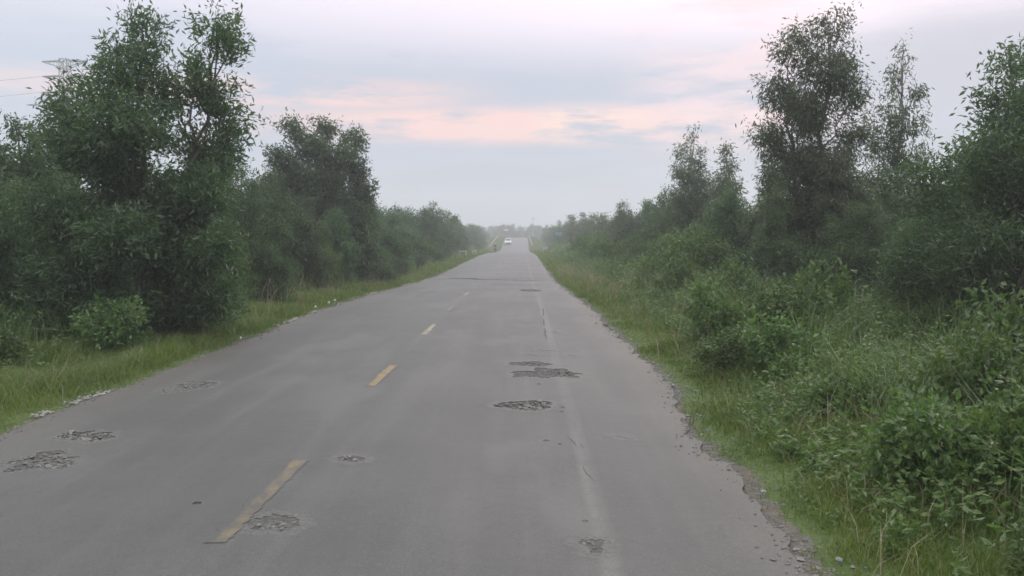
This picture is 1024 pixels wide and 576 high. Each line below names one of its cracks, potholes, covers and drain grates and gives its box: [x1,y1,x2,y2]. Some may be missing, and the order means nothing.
pothole [246,513,300,532]
pothole [162,381,218,393]
pothole [510,368,581,378]
pothole [494,400,552,411]
pothole [53,430,116,442]
crack [524,308,577,356]
pothole [2,450,79,472]
pothole [579,539,604,554]
